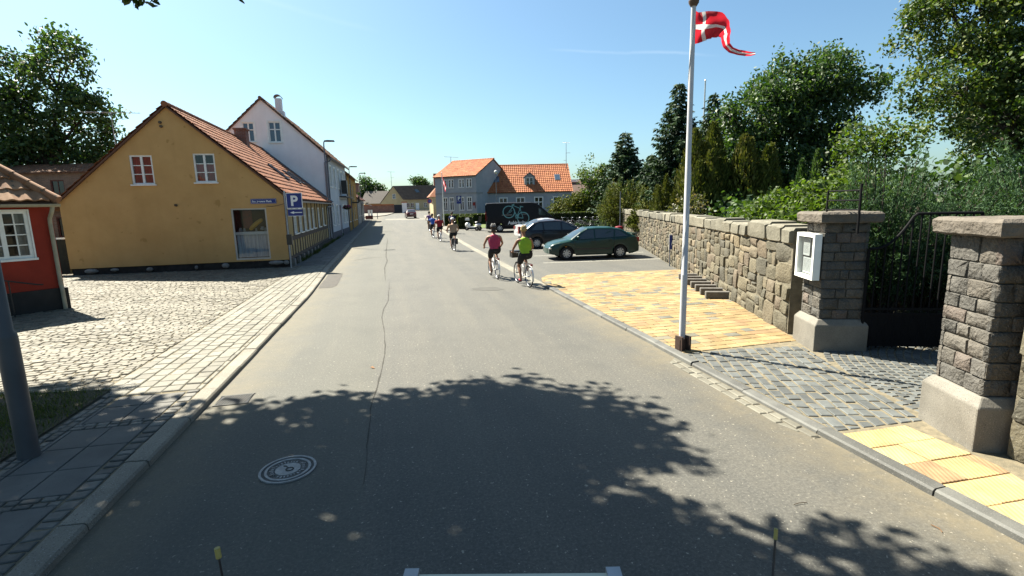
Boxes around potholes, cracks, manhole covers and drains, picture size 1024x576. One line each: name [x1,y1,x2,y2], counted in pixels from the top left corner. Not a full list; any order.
crack [359,239,389,484]
drain grate [212,393,255,407]
manhole cover [258,455,317,484]
